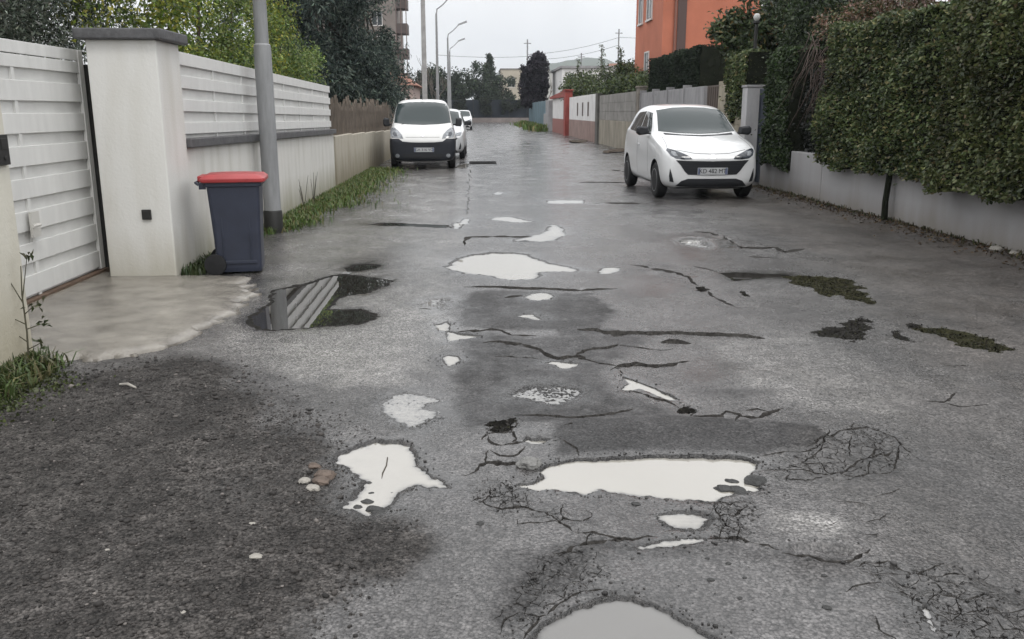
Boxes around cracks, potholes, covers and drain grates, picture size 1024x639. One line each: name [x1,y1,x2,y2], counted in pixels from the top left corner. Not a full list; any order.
crack [459,328,784,639]
pothole [377,391,443,430]
pothole [502,382,589,406]
pothole [671,236,720,250]
pothole [516,454,764,502]
crack [634,265,743,309]
pothole [811,318,874,343]
pothole [781,275,877,305]
pothole [911,326,1018,353]
crack [707,423,1024,639]
pothole [329,438,452,519]
pothole [527,593,719,639]
